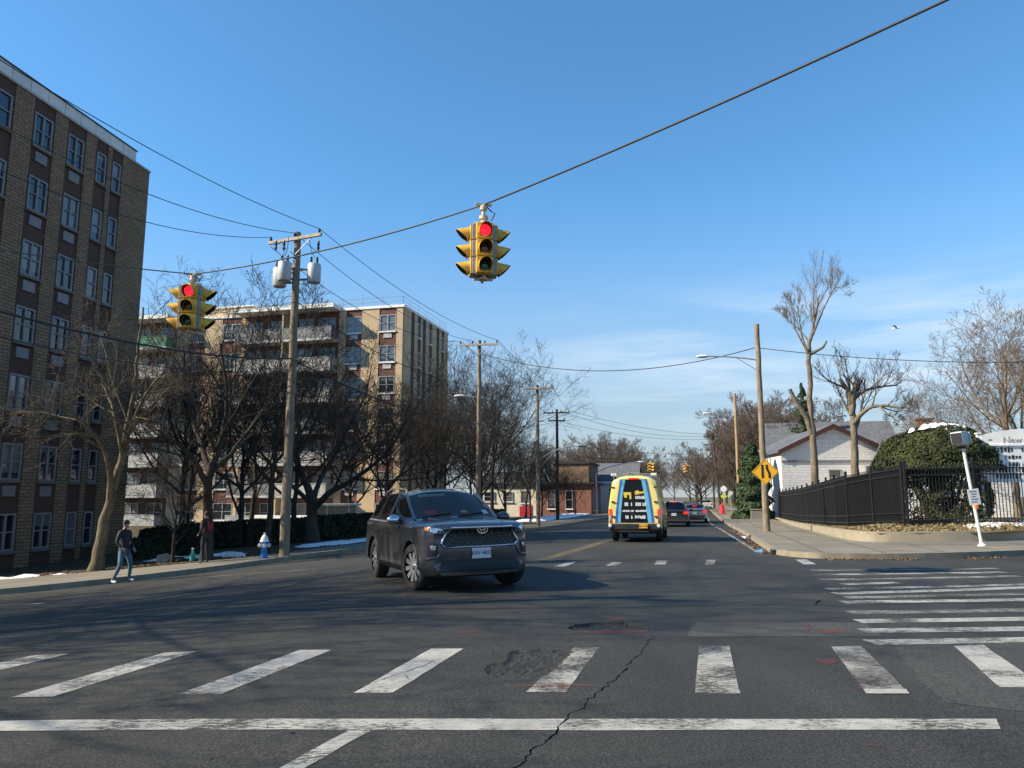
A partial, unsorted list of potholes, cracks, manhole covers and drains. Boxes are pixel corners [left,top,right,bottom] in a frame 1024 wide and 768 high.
pothole [485,649,574,679]
crack [513,638,654,768]
pothole [567,622,649,631]
